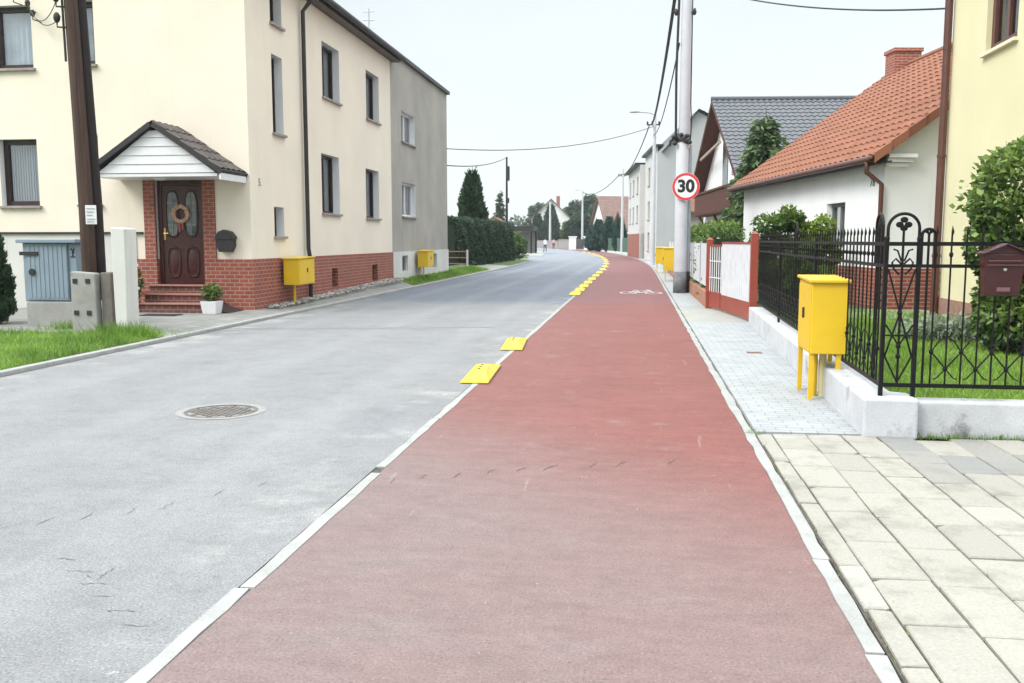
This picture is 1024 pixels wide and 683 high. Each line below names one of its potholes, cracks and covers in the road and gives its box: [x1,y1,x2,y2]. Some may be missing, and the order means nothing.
crack [60,558,147,627]
manhole cover [175,403,267,420]
